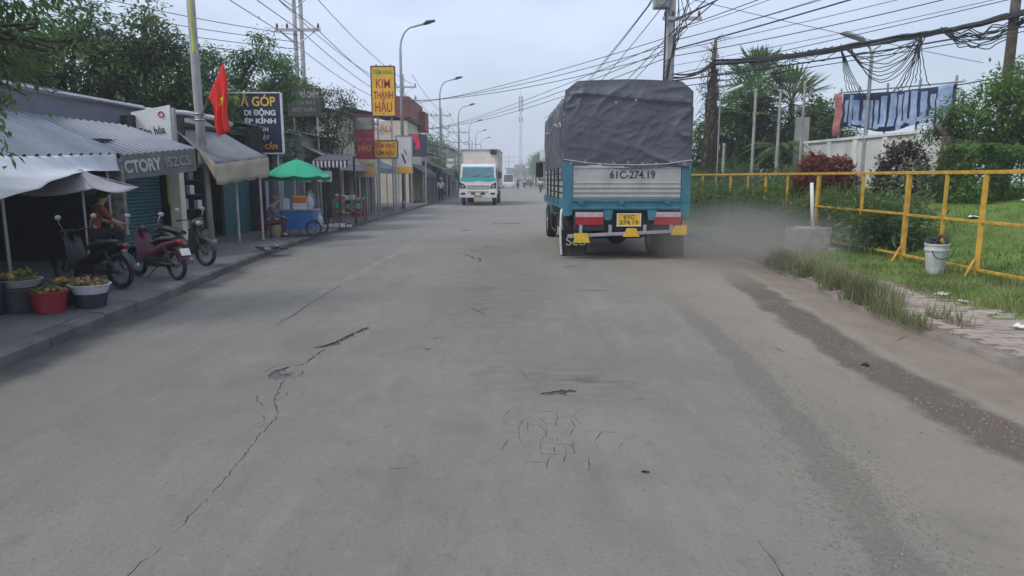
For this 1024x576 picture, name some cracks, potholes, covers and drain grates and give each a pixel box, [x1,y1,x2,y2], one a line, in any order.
crack [127,349,326,576]
crack [502,410,624,469]
